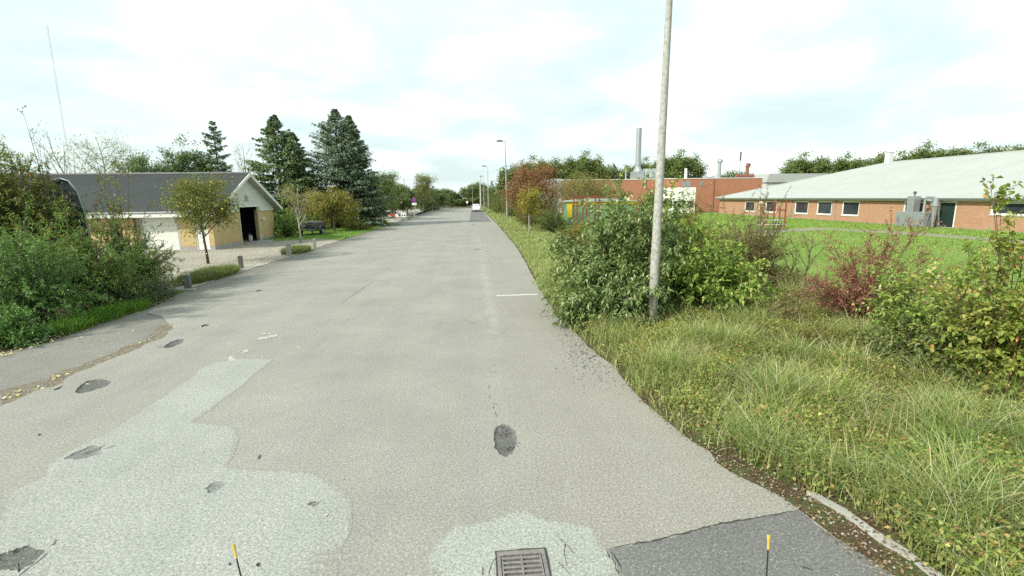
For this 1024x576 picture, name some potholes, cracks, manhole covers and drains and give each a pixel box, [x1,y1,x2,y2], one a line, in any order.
drain grate [497,548,550,576]
